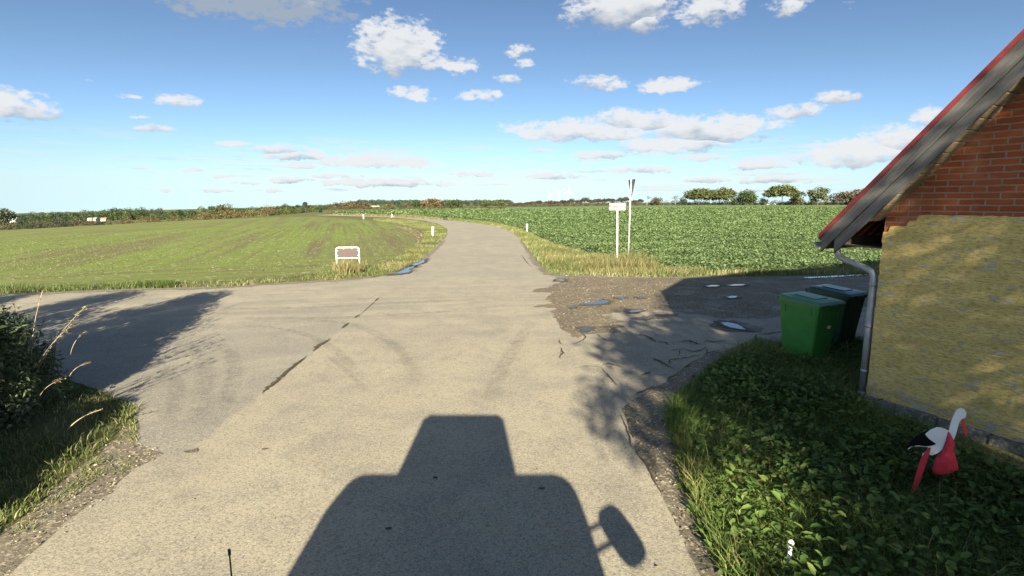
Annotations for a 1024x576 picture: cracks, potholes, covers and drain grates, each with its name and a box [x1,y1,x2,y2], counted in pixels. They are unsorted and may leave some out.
crack [636,335,726,394]
pothole [709,320,764,332]
pothole [567,299,615,308]
